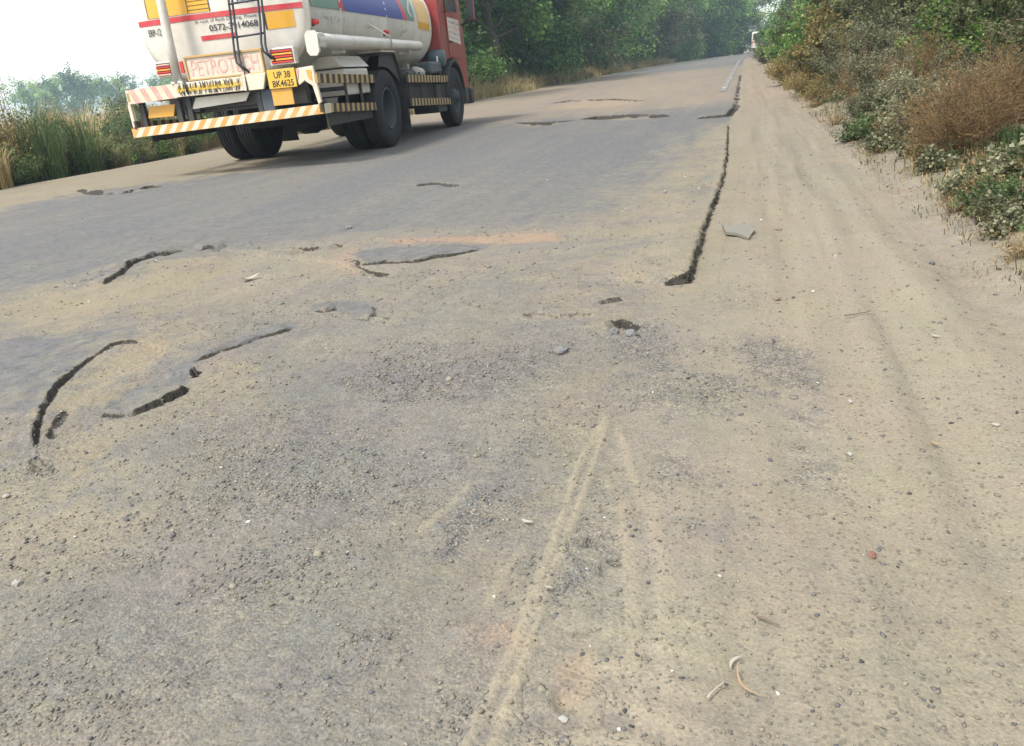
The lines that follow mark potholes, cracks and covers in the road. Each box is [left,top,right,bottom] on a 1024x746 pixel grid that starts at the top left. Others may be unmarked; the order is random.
crack [391,179,485,190]
crack [572,74,762,310]
crack [3,302,393,463]
crack [74,242,246,293]
crack [340,244,501,271]
pothole [589,315,657,344]
crack [56,182,192,197]
